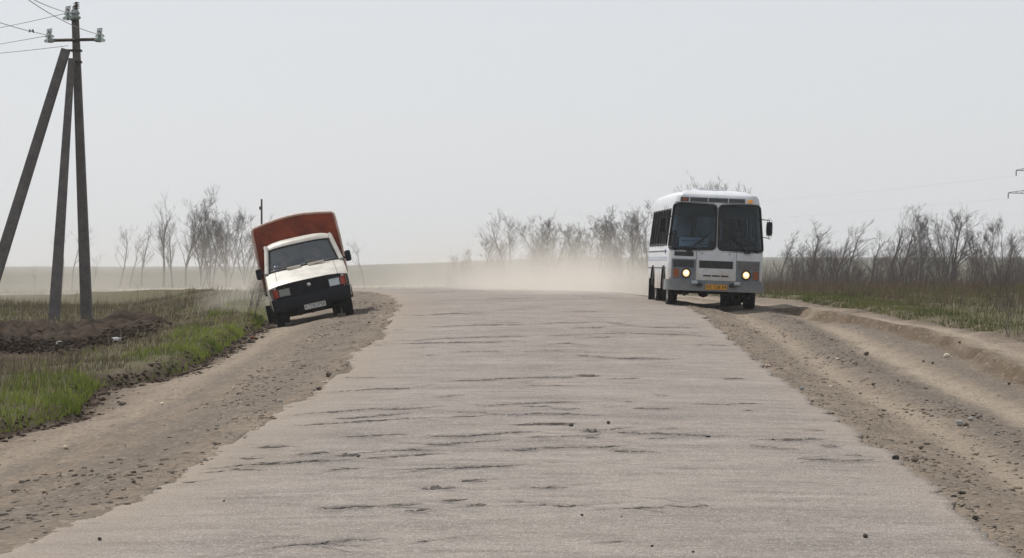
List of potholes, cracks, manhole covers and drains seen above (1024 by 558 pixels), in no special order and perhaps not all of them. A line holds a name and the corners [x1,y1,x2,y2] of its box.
crack [192,296,883,517]
crack [230,533,485,557]
